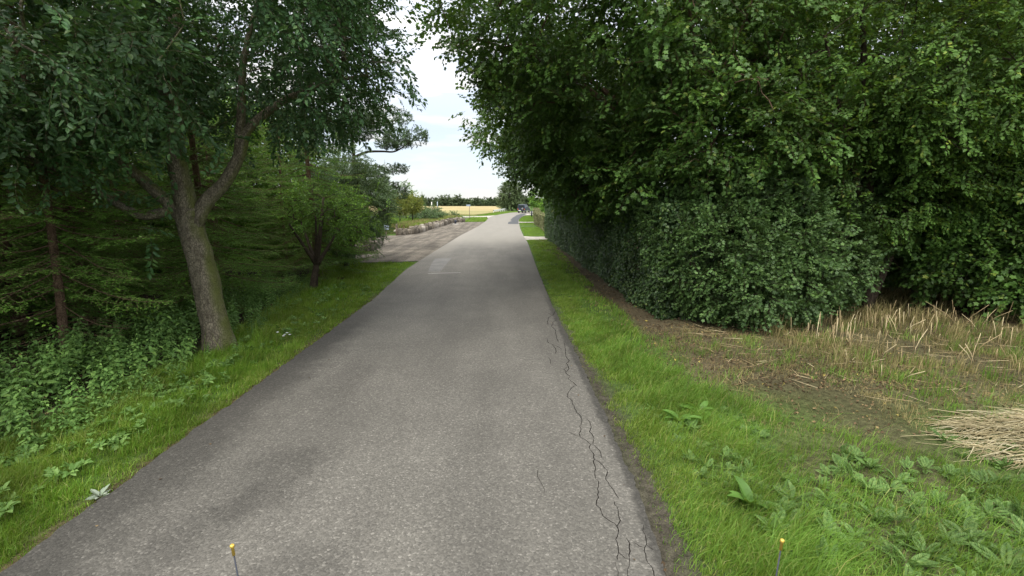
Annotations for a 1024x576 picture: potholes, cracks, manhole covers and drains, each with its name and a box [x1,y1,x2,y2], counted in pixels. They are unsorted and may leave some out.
crack [547,312,655,576]
